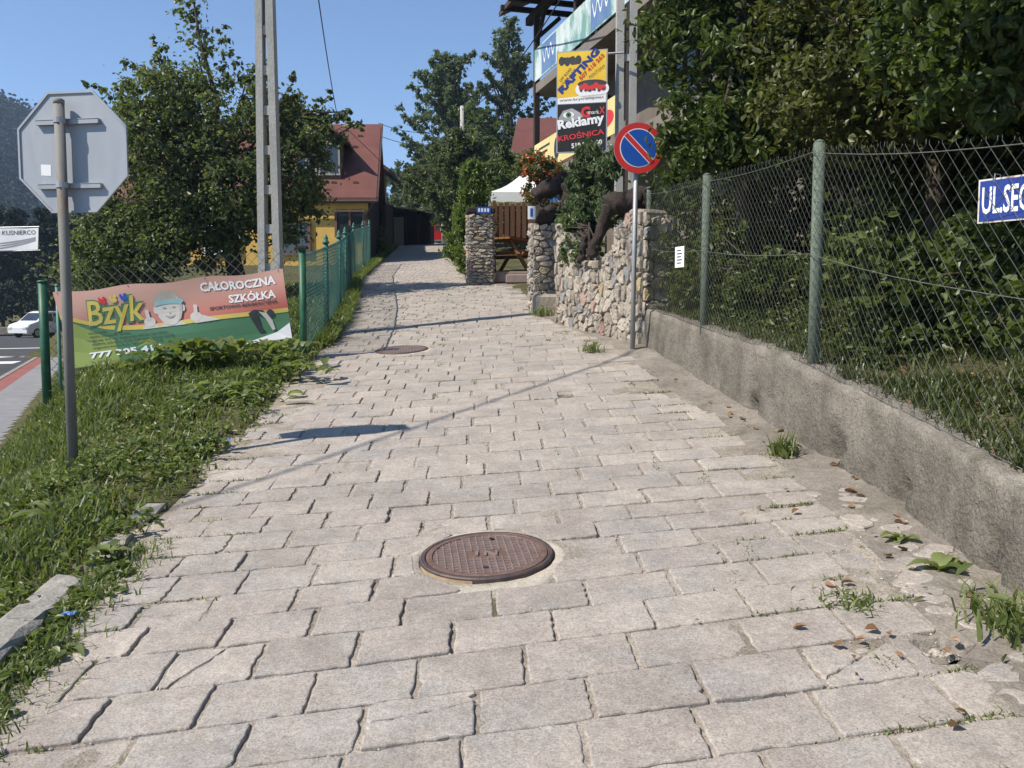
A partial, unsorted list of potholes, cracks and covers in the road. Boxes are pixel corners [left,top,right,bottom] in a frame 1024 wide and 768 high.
manhole cover [372,345,432,356]
pothole [906,635,977,665]
manhole cover [390,529,565,594]
